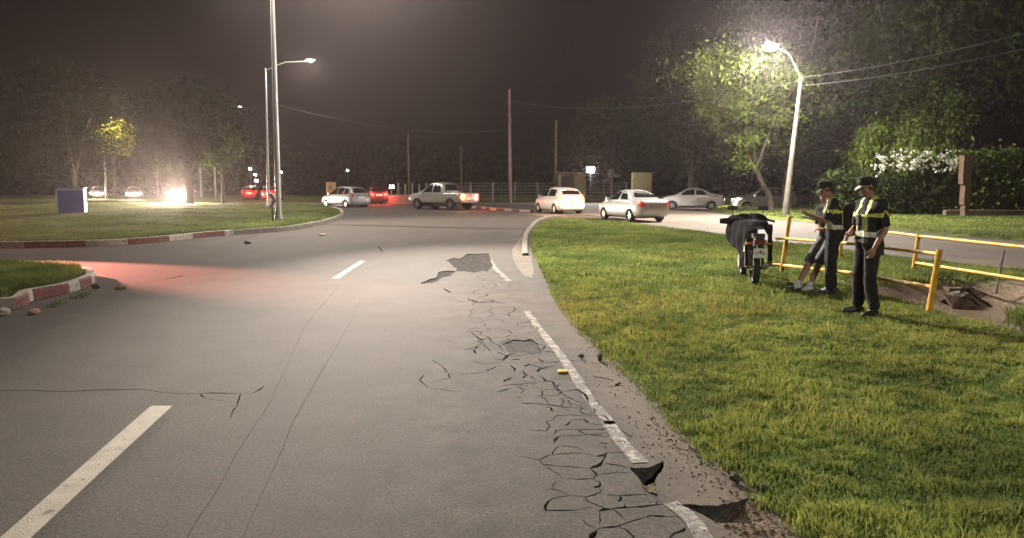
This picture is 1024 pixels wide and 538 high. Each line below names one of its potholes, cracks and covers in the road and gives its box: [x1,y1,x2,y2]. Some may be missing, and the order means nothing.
pothole [421,271,455,284]
pothole [447,253,493,273]
crack [419,273,685,538]
pothole [678,498,787,538]
pothole [629,461,664,495]
pothole [504,339,541,355]
crack [0,386,264,418]
